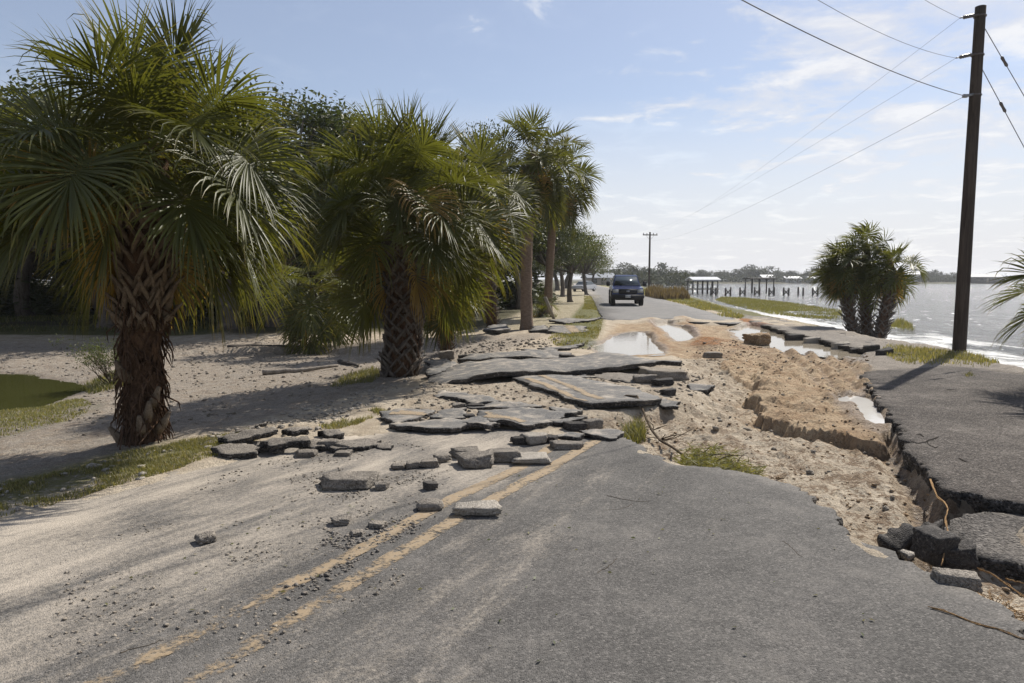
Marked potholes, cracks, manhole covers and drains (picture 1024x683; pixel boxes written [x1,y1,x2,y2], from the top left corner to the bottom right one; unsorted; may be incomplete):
pothole [574,330,683,357]
